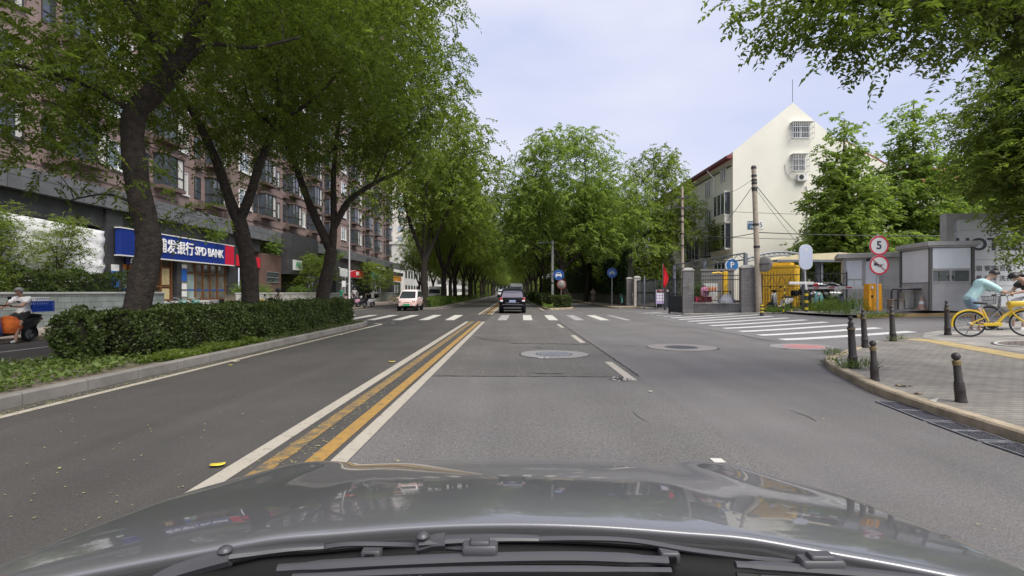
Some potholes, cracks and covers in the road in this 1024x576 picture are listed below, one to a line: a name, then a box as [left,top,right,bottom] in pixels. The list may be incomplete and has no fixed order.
drain grate [875,401,954,422]
manhole cover [519,350,590,359]
drain grate [982,441,1024,457]
drain grate [927,421,1012,442]
